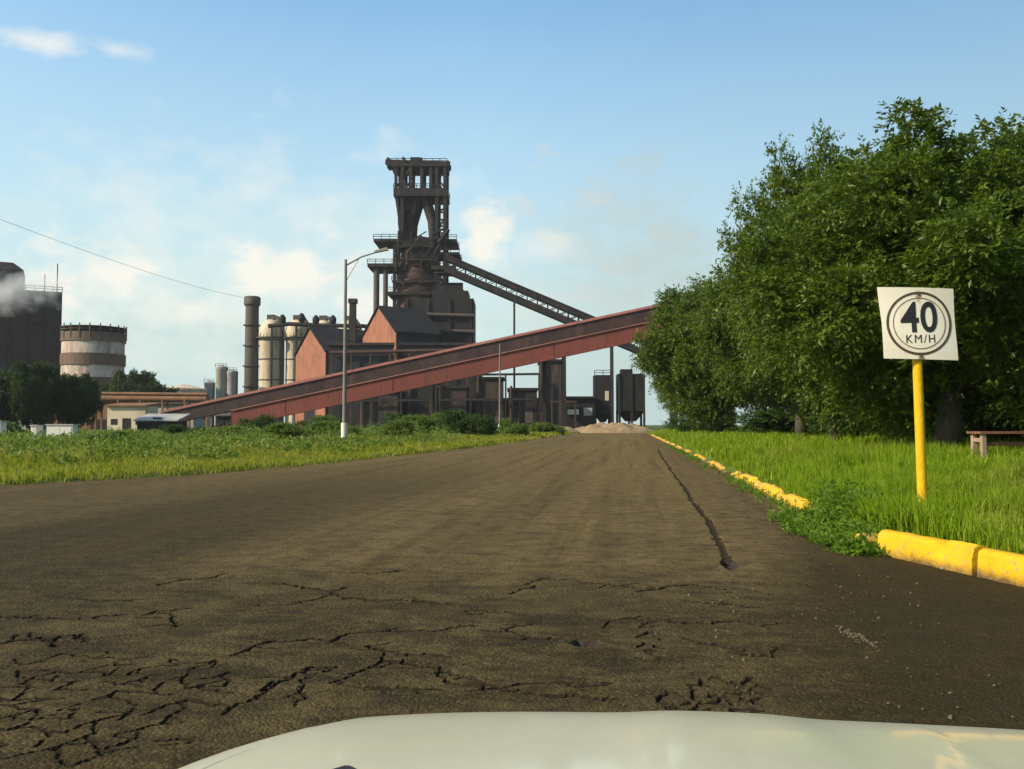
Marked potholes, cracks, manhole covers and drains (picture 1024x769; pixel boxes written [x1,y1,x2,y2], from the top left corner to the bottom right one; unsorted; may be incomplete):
crack [658,449,733,561]
crack [0,570,627,768]
crack [510,578,800,661]
